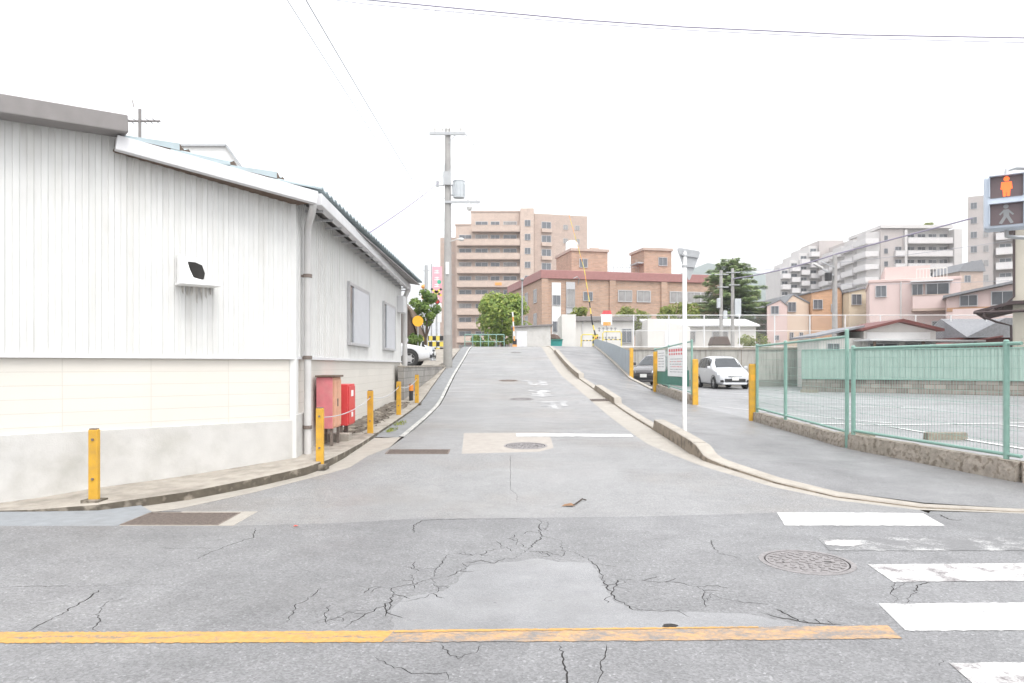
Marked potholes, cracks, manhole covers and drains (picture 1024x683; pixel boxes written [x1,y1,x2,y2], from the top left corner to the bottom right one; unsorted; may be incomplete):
crack [15,584,166,632]
crack [375,646,479,679]
crack [559,645,568,683]
manhole cover [758,549,857,575]
crack [286,519,841,625]
